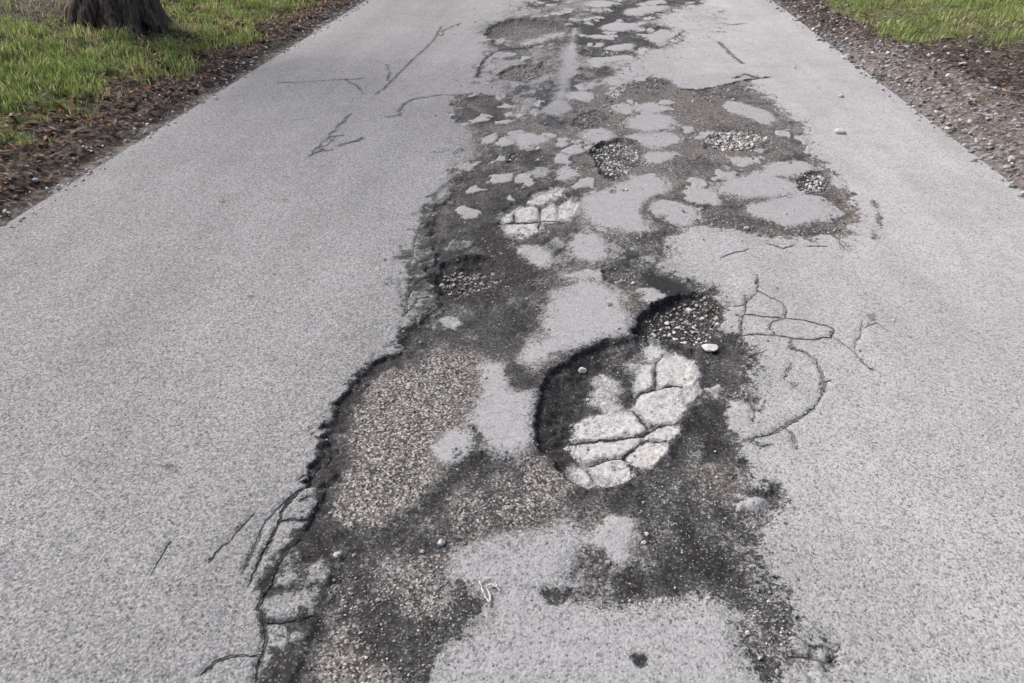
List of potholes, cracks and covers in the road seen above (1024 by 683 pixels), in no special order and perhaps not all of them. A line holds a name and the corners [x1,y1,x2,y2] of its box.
pothole [630,290,725,347]
